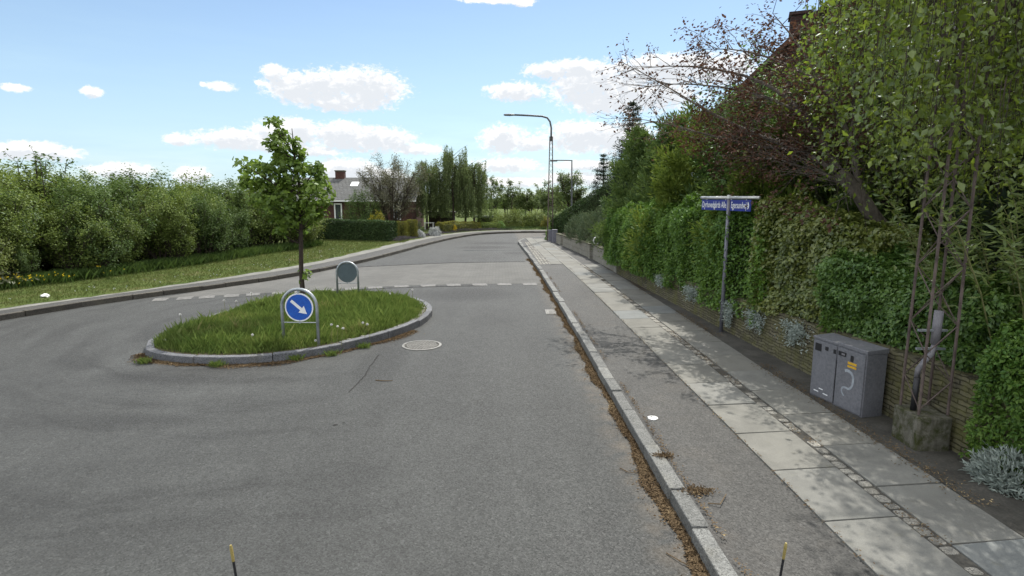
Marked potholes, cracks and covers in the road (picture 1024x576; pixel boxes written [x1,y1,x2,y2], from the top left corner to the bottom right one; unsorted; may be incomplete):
manhole cover [402,340,442,351]
